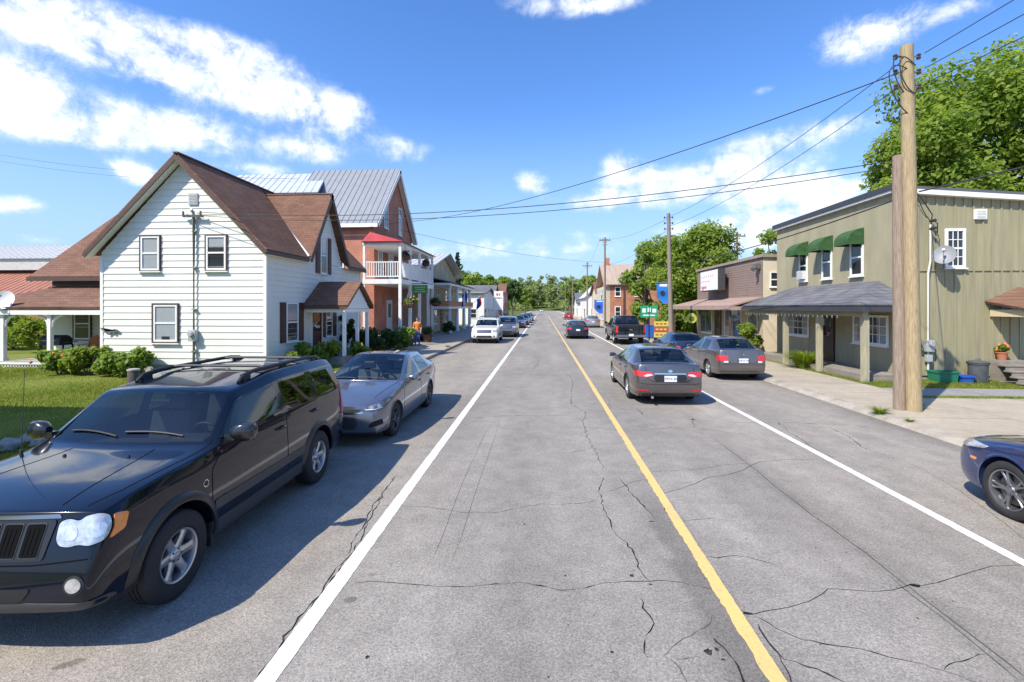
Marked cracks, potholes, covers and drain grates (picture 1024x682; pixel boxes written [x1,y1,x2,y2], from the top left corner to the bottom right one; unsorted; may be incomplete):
crack [255,371,1011,682]
